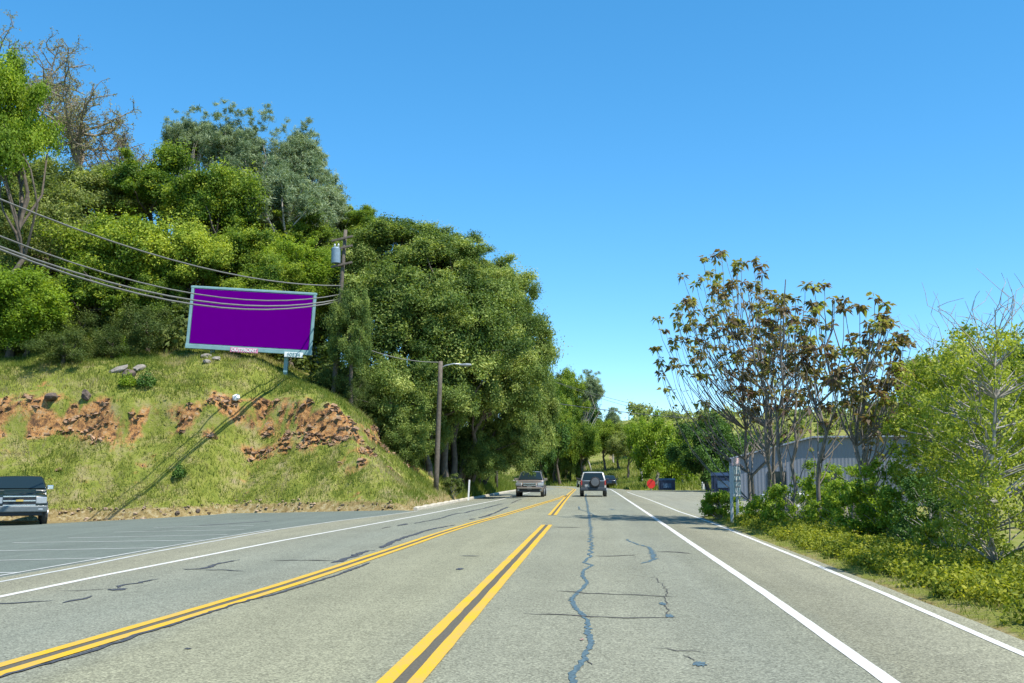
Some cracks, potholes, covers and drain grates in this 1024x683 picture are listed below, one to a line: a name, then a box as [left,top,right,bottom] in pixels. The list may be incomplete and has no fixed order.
crack [528,576,670,618]
